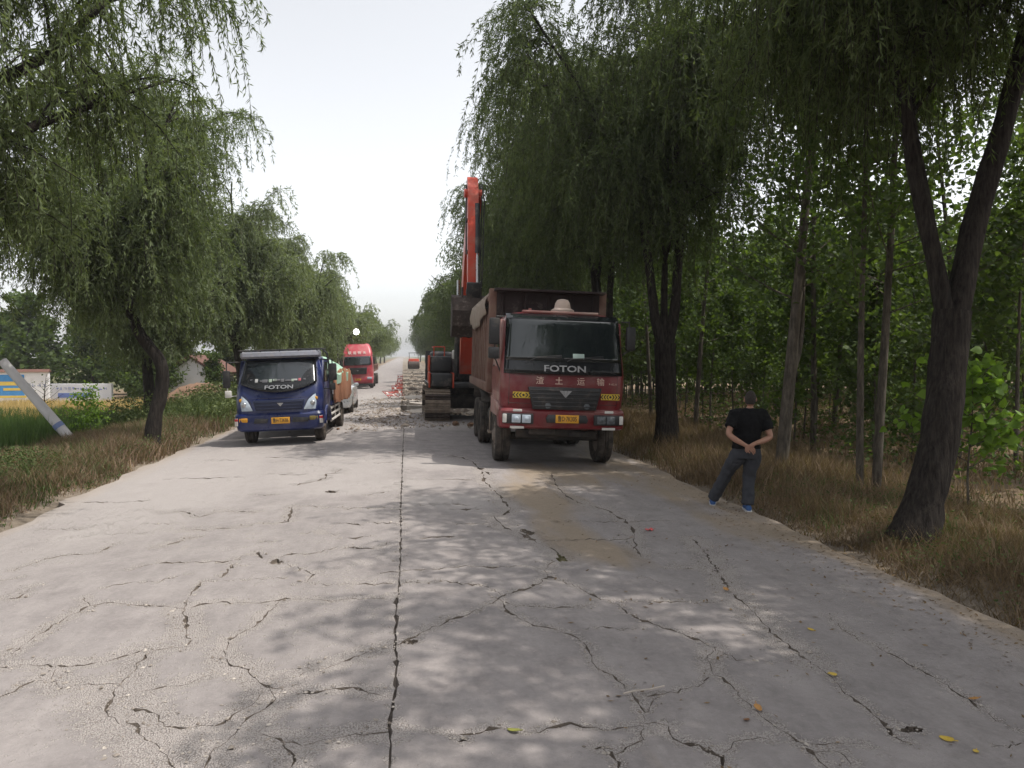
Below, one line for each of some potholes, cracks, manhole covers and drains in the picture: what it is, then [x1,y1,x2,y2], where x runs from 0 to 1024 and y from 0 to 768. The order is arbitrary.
crack [0,506,516,768]
crack [830,618,998,722]
crack [398,562,857,768]
crack [413,456,666,555]
